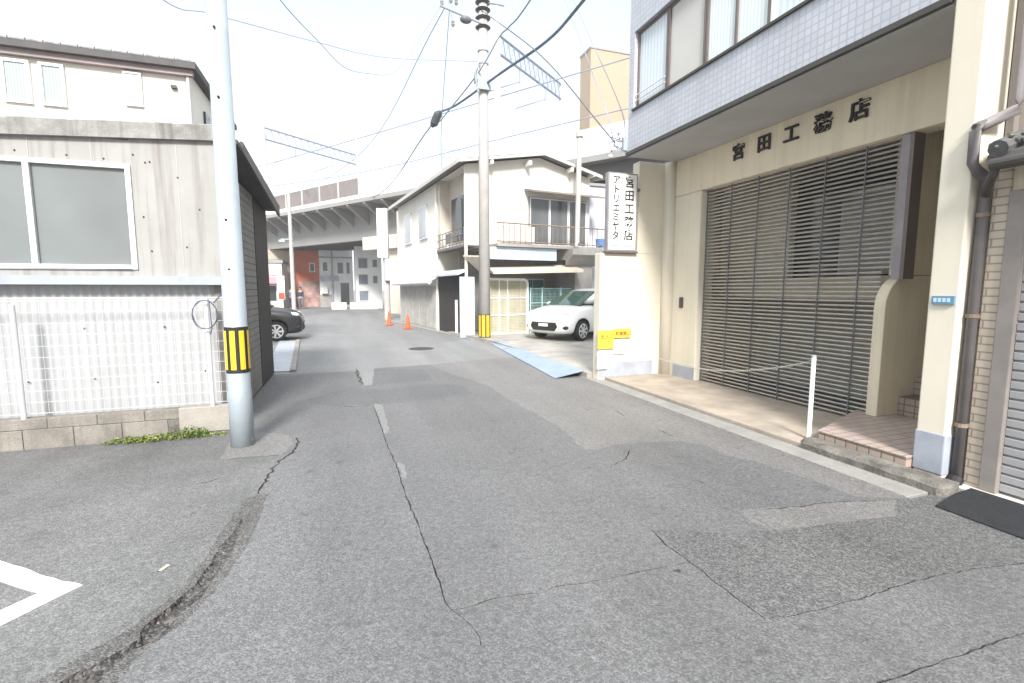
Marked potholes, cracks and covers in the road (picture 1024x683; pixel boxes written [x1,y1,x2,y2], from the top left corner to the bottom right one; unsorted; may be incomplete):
crack [232,438,300,494]
crack [345,405,683,645]
crack [652,530,1024,622]
